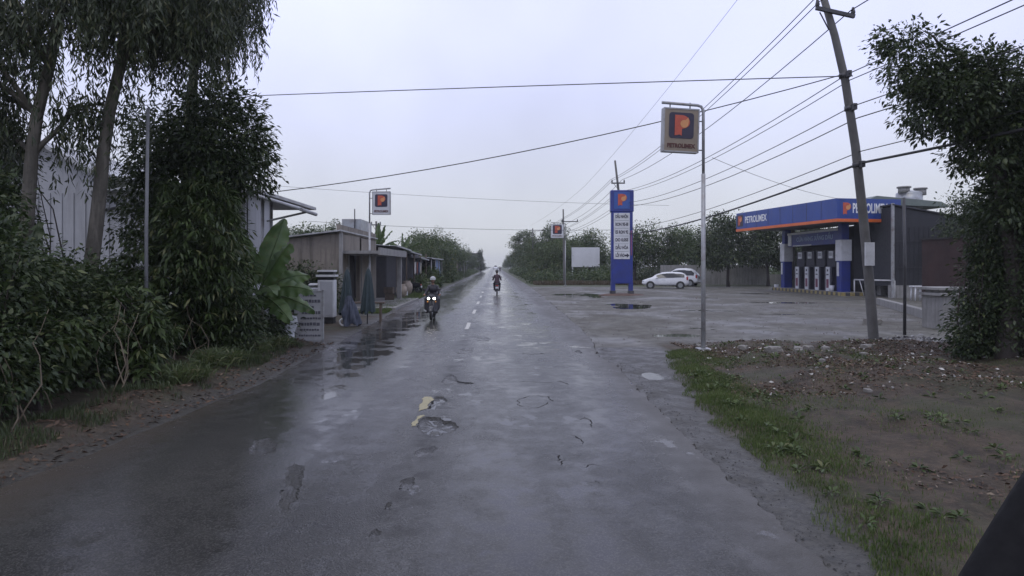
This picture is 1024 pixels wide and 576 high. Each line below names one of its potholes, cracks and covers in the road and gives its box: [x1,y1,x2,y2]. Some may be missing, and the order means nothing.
pothole [413,446,439,457]
pothole [417,416,459,436]
pothole [279,463,305,514]
crack [556,418,592,465]
